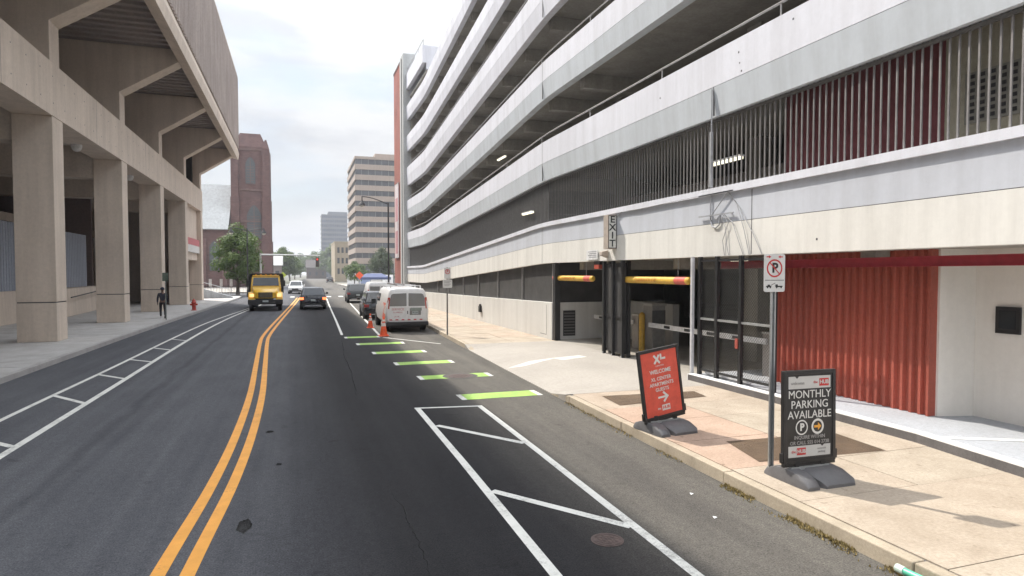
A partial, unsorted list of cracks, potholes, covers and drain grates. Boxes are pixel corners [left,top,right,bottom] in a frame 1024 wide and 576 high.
manhole cover [591,533,624,547]
pothole [236,519,252,534]
